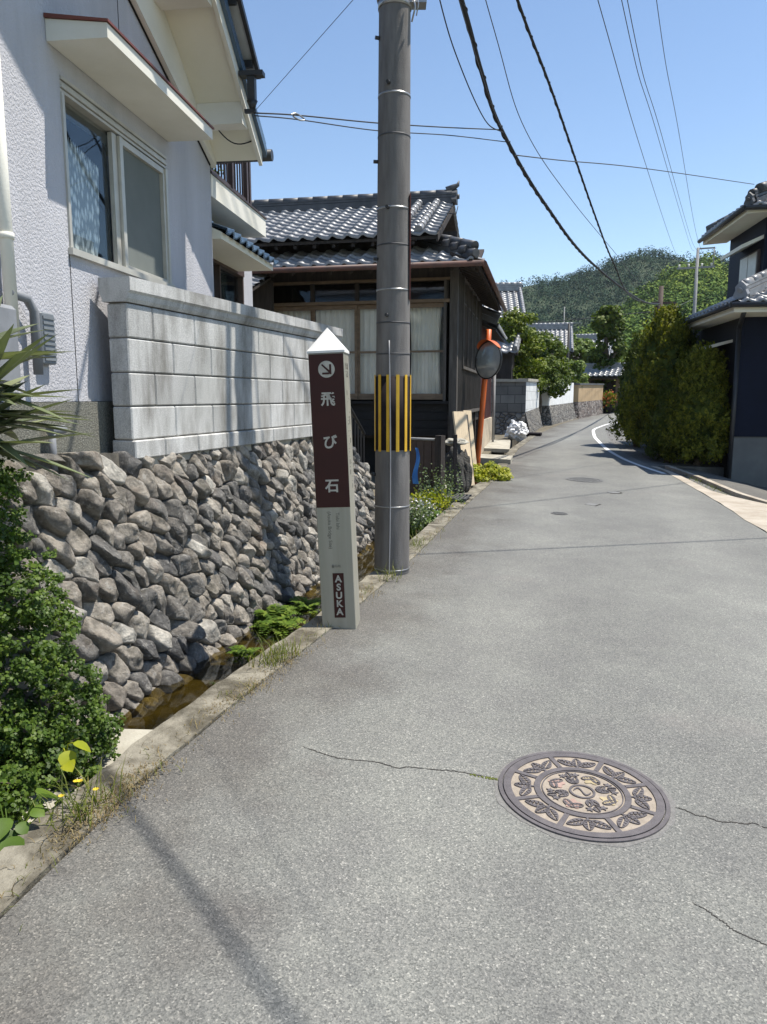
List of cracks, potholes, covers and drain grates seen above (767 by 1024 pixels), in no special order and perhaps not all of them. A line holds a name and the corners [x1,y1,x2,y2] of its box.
manhole cover [494,750,676,848]
crack [675,807,767,828]
crack [303,746,498,781]
crack [693,902,767,945]
